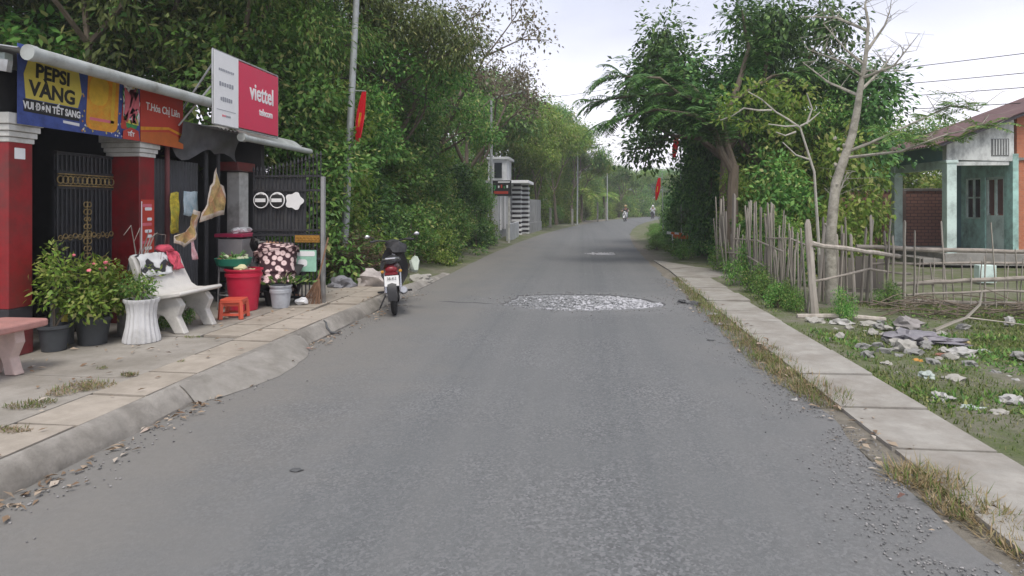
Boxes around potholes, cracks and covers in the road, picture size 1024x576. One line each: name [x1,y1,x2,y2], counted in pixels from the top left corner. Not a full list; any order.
pothole [501,294,666,311]
